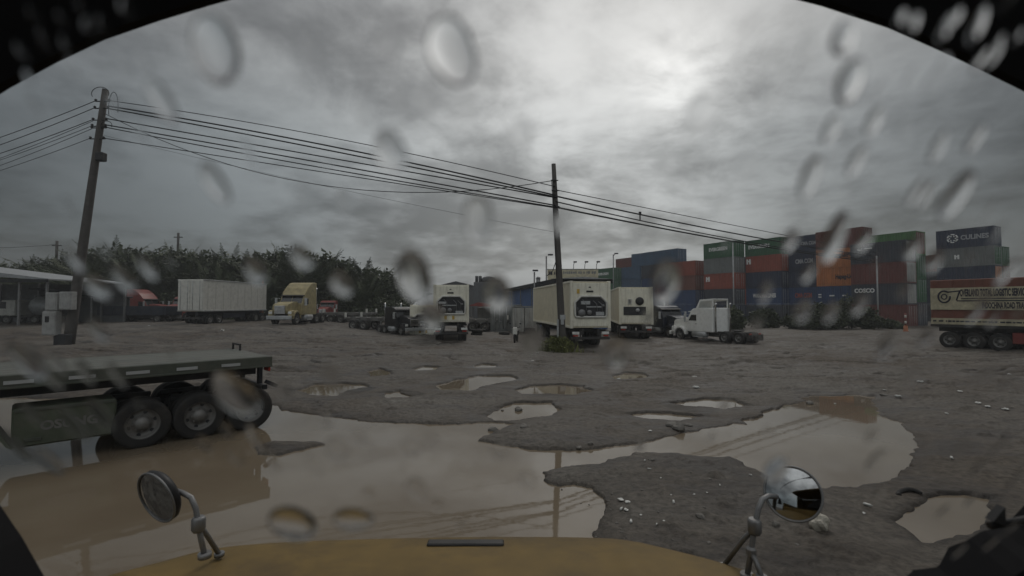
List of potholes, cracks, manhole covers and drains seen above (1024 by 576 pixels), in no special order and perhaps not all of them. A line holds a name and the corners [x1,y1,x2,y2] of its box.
pothole [660,396,750,414]
pothole [294,381,375,396]
pothole [881,488,1004,545]
pothole [512,383,596,398]
pothole [610,371,650,379]
pothole [380,389,424,398]
pothole [482,400,562,421]
pothole [363,367,396,376]
pothole [433,373,519,391]
pothole [624,409,709,421]
